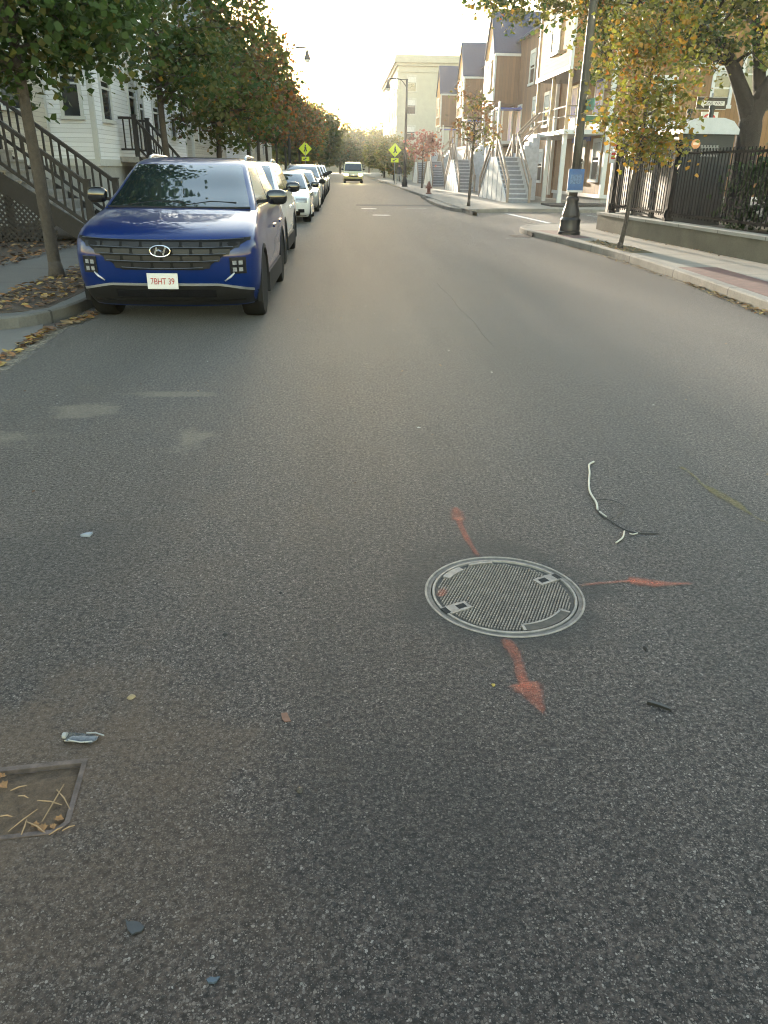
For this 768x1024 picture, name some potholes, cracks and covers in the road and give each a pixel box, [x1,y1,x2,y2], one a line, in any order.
manhole cover [425,556,585,638]
